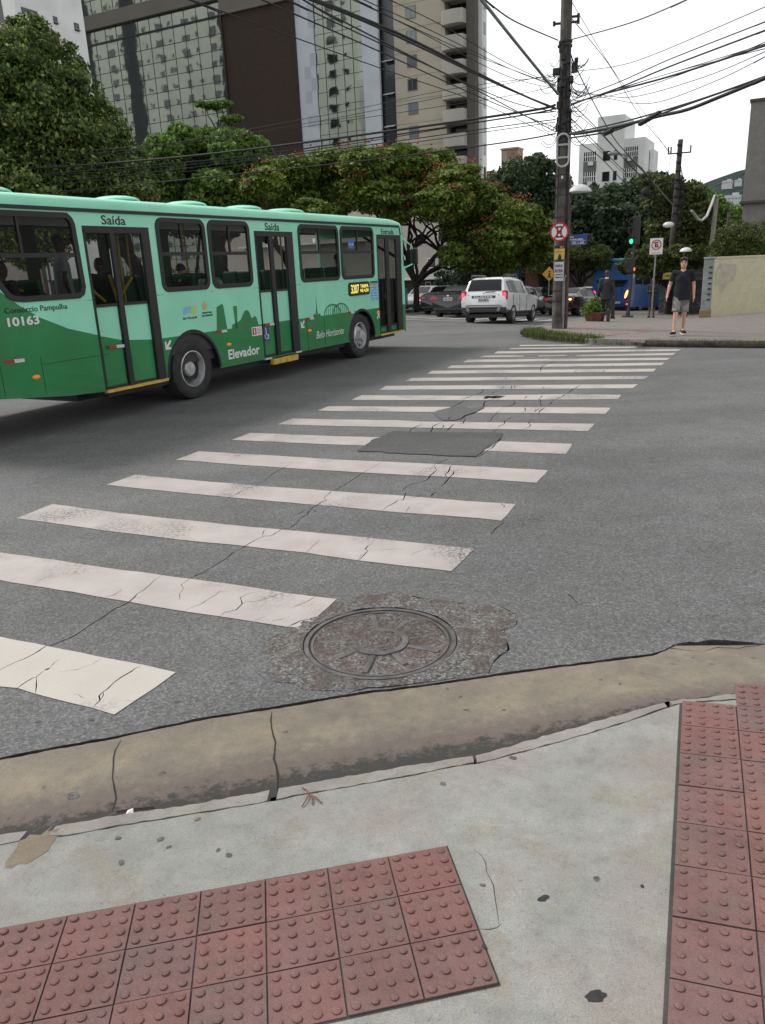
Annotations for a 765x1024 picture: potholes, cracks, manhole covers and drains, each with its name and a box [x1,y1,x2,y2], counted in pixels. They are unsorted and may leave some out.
crack [380,459,454,512]
crack [409,362,577,462]
manhole cover [304,608,456,680]
crack [112,742,120,811]
crack [179,473,363,596]
crack [38,596,136,652]
